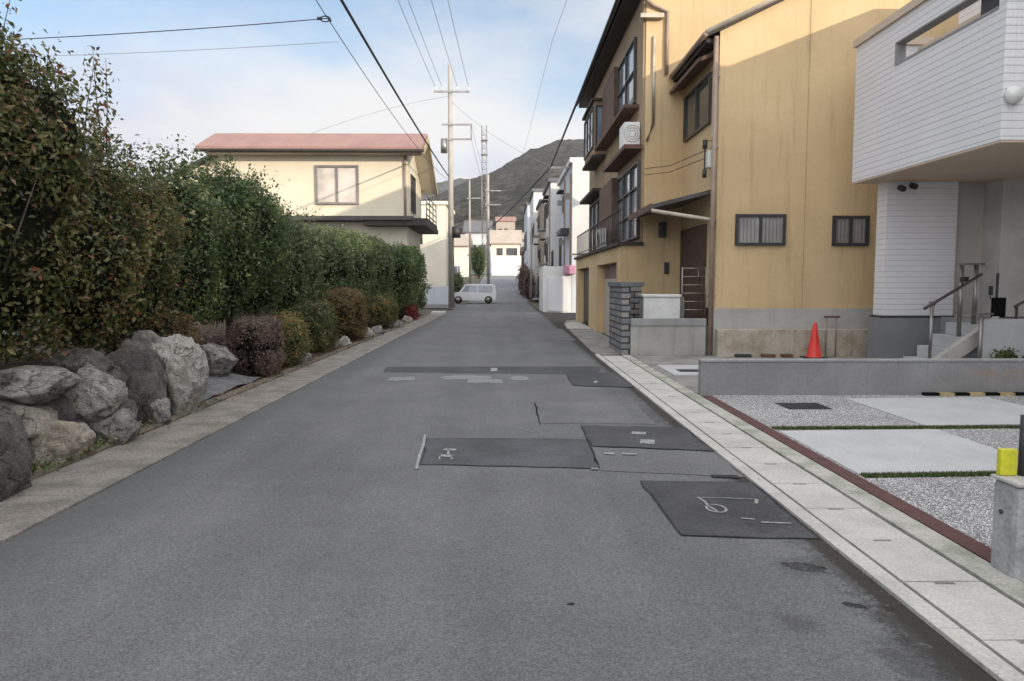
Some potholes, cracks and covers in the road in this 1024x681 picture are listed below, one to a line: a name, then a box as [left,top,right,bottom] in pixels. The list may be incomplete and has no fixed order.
pothole [780,562,827,573]
